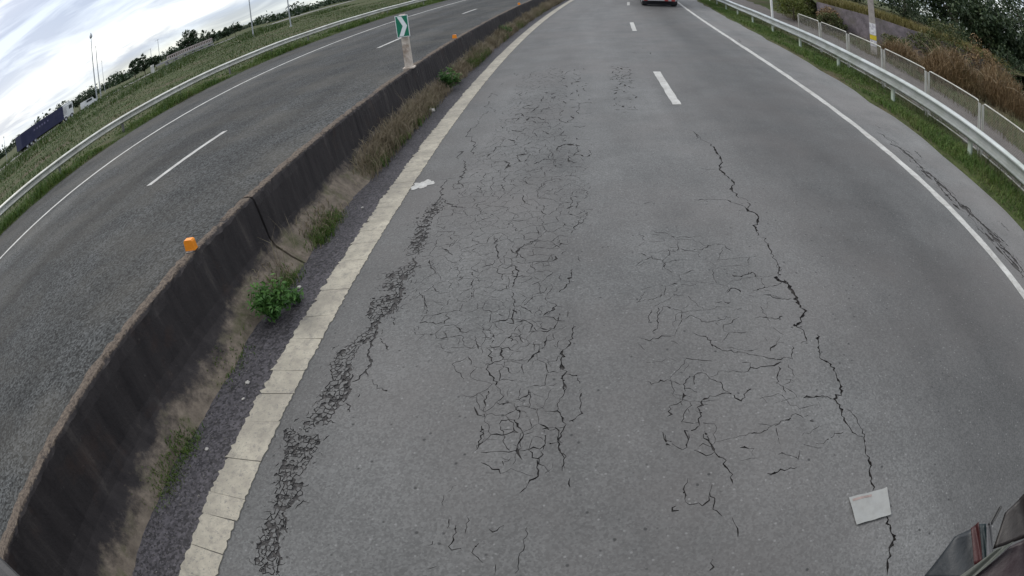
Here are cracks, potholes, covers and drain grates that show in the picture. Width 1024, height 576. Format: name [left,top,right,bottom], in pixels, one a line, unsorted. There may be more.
crack [249,66,593,576]
crack [612,48,651,113]
crack [638,131,896,574]
crack [879,133,1024,278]
